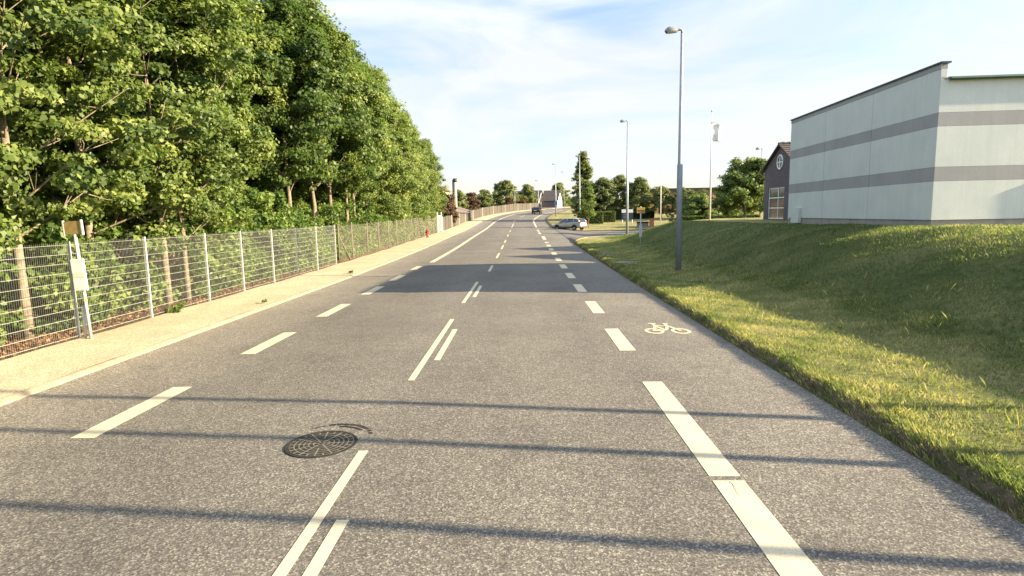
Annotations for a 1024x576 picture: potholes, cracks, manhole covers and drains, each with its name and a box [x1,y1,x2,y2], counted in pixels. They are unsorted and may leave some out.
manhole cover [284,423,373,458]
